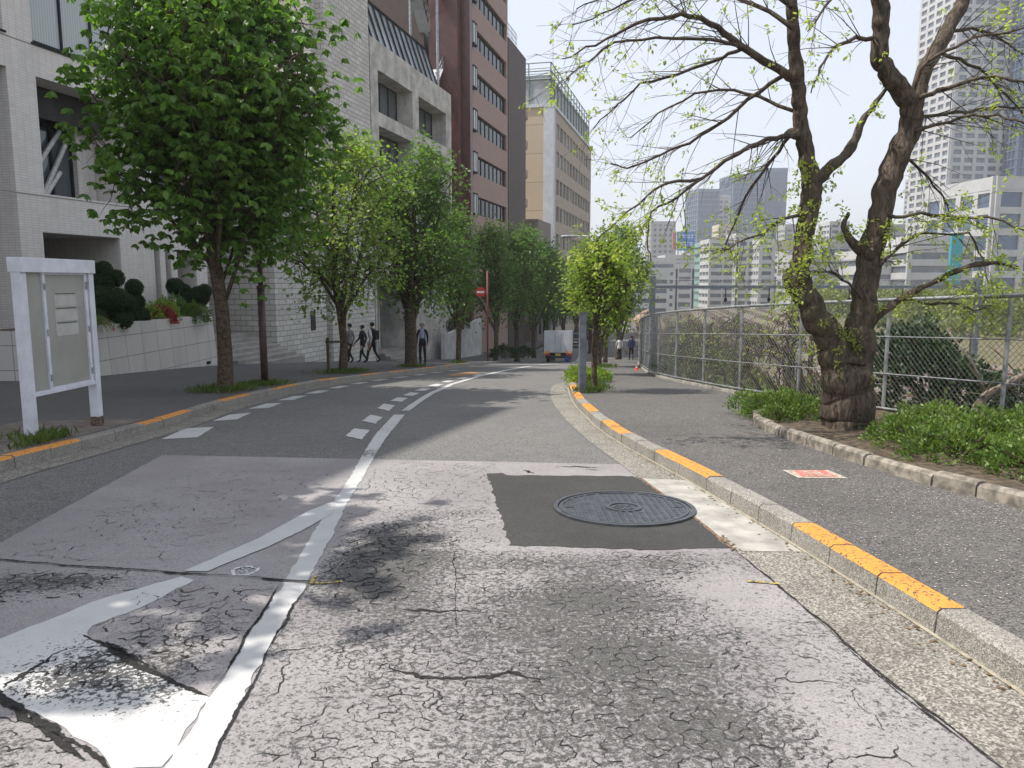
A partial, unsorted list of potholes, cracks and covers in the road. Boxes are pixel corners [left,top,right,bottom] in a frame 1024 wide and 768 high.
crack [321,463,721,612]
crack [3,553,1003,768]
crack [16,470,332,561]
manhole cover [554,490,696,528]
